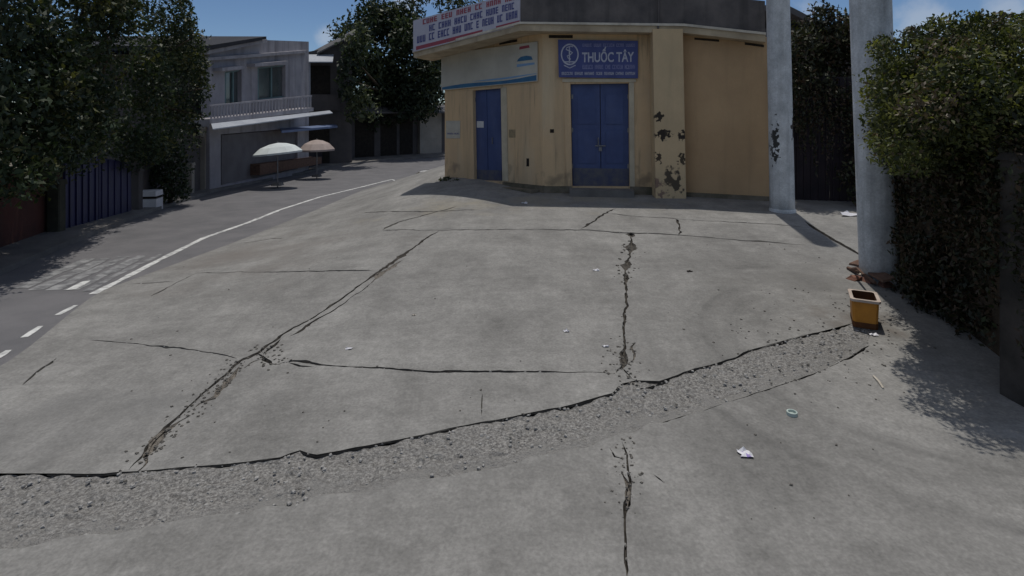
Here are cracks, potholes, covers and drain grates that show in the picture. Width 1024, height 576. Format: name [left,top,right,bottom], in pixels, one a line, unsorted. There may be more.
crack [24,361,53,384]
crack [47,206,858,477]
crack [600,436,663,576]
